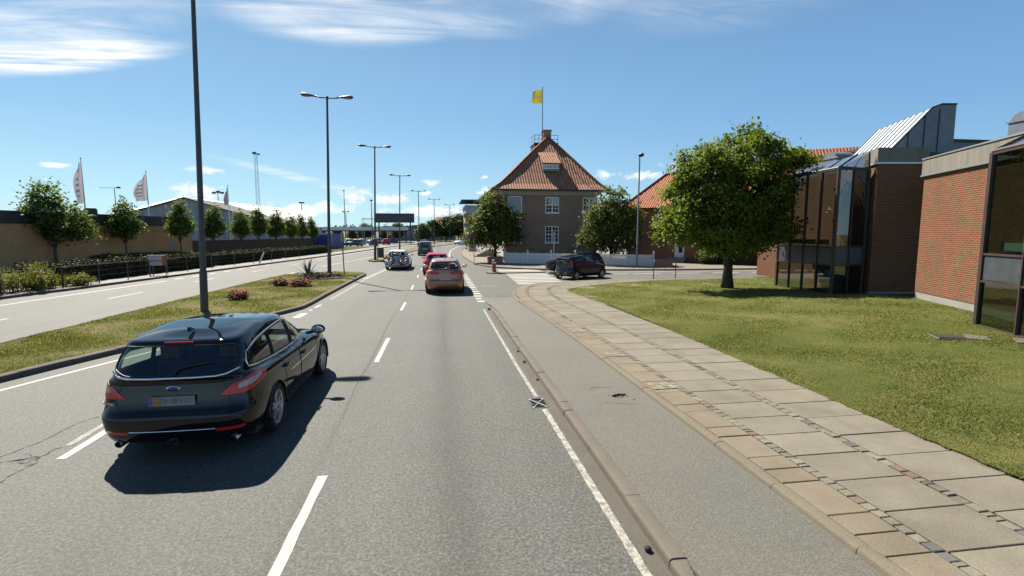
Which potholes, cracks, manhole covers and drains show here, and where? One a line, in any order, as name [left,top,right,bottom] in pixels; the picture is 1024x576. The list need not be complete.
crack [0,416,99,483]
